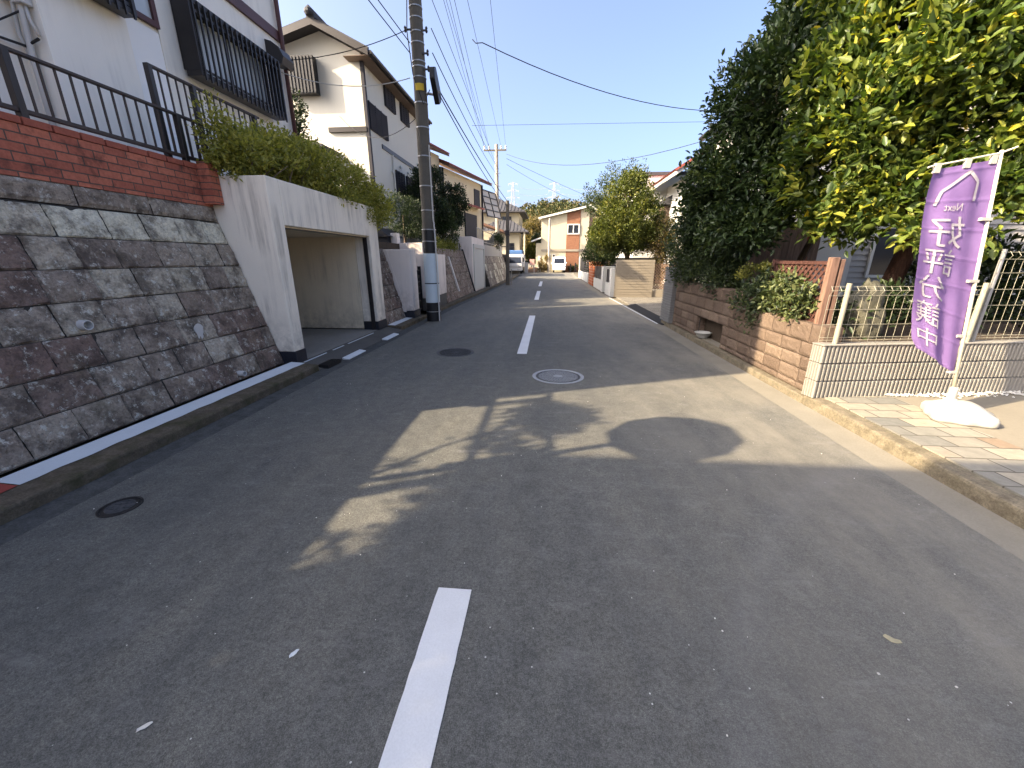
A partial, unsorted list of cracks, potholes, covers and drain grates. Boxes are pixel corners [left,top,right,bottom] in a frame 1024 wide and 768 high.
drain grate [318,359,342,369]
manhole cover [532,369,584,384]
manhole cover [437,348,474,357]
manhole cover [95,496,144,518]
